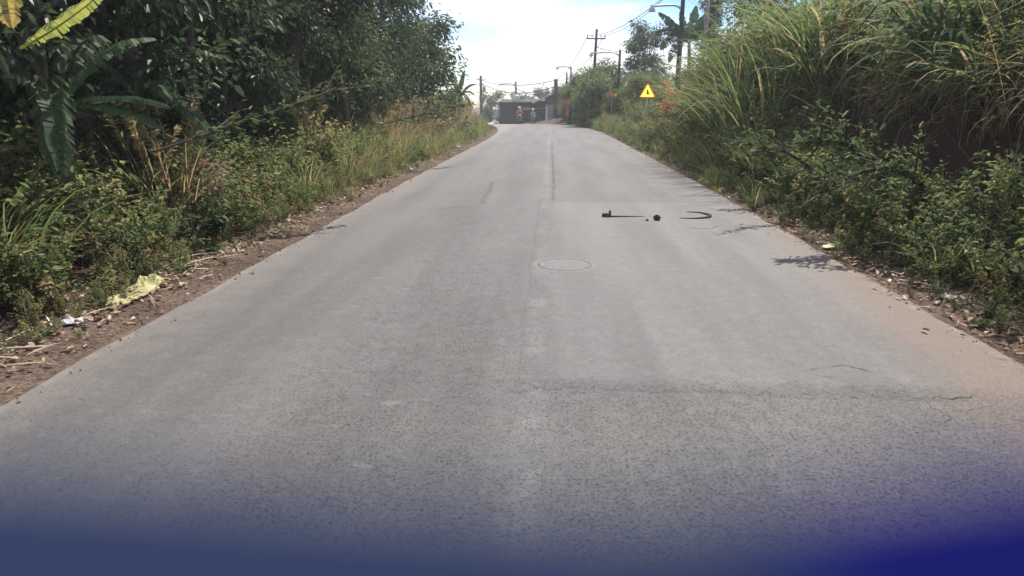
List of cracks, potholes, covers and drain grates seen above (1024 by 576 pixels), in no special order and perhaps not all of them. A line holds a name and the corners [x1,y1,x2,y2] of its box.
manhole cover [531,257,597,273]
